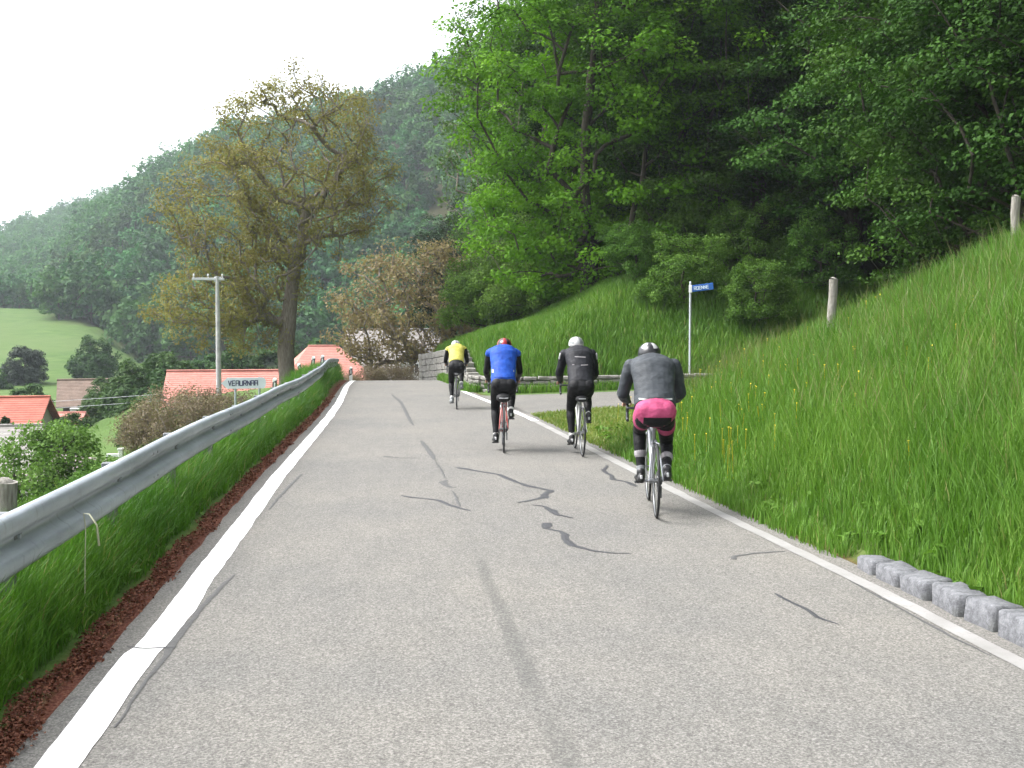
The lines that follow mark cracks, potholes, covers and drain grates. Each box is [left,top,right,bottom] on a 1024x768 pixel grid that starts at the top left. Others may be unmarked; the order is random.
crack [731,551,785,559]
crack [601,465,637,486]
crack [775,580,991,656]
crack [392,395,630,554]
